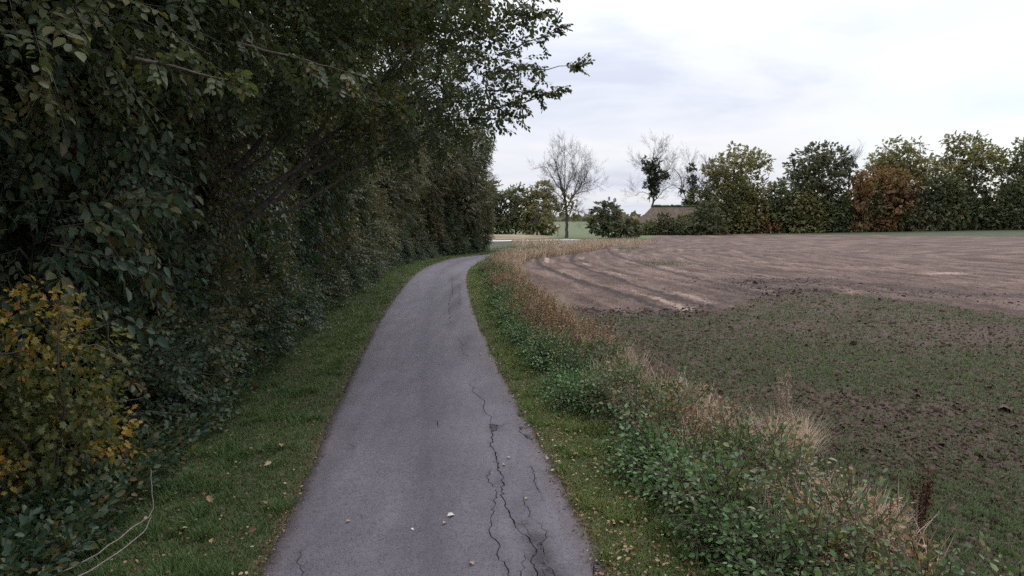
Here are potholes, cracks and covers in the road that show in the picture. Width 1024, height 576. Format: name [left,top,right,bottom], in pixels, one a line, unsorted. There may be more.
crack [469,385,555,576]
